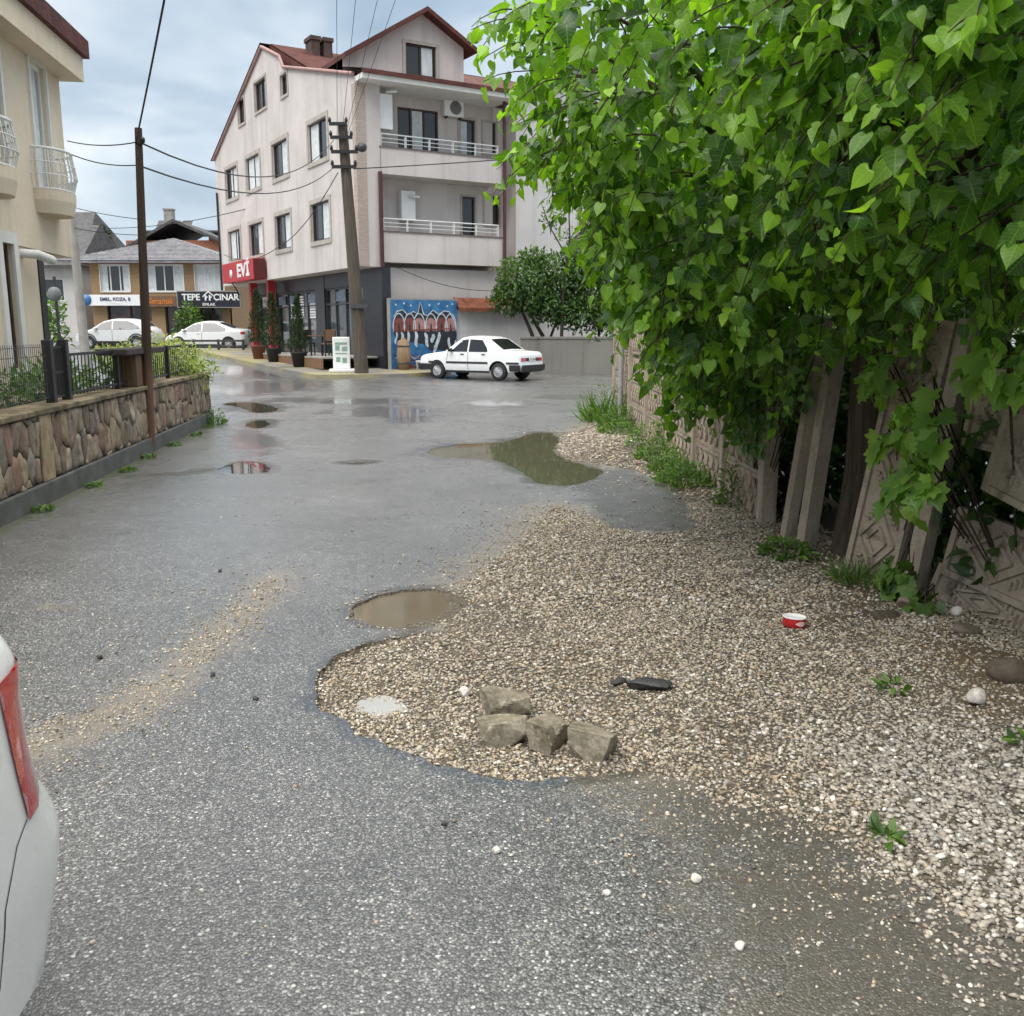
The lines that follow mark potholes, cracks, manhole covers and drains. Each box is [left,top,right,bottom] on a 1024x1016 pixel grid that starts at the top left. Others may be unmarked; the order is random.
pothole [245,420,271,428]
pothole [427,432,603,486]
pothole [351,589,468,628]
pothole [223,402,280,413]
pothole [217,461,271,474]
